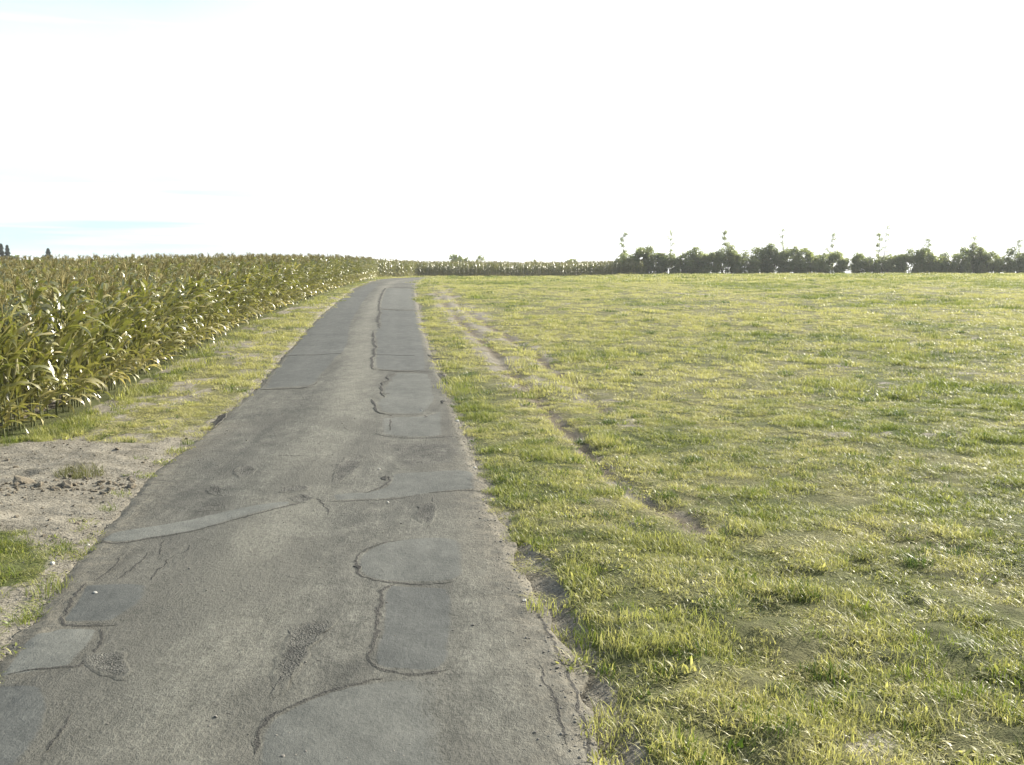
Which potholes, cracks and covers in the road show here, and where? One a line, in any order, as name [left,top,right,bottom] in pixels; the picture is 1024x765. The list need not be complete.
crack [370,288,454,439]
pothole [82,650,133,680]
crack [316,476,410,515]
crack [527,597,592,761]
pothole [269,609,339,699]
crack [7,503,299,675]
crack [251,540,450,754]
